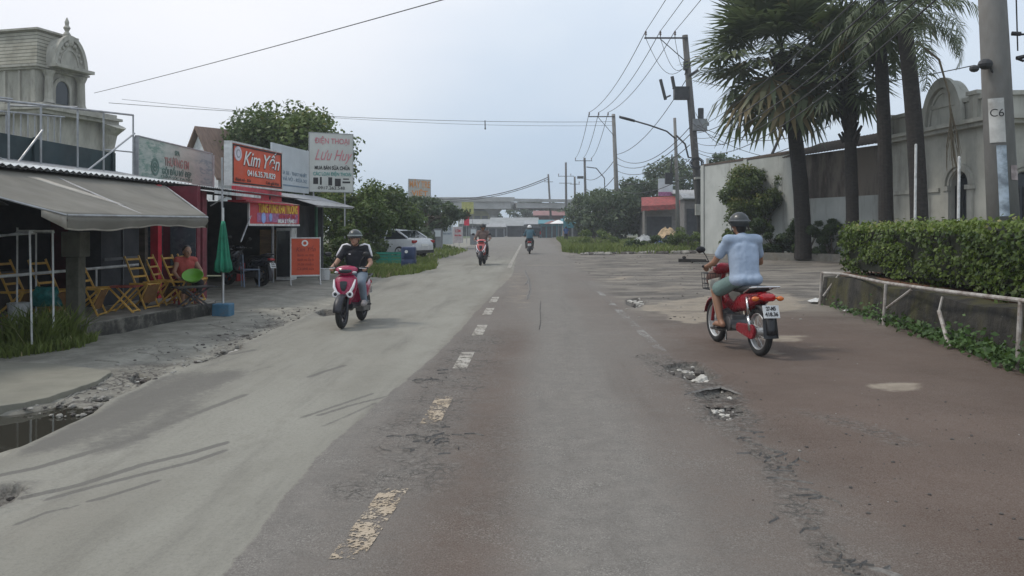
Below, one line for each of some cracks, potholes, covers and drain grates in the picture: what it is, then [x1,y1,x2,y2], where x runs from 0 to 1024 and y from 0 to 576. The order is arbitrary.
crack [524,266,568,329]
crack [737,429,903,576]
pothole [106,371,175,391]
pothole [642,359,740,386]
crack [412,369,466,388]
crack [379,425,484,455]
pothole [685,399,767,427]
pothole [669,384,758,408]
pothole [65,387,143,408]
